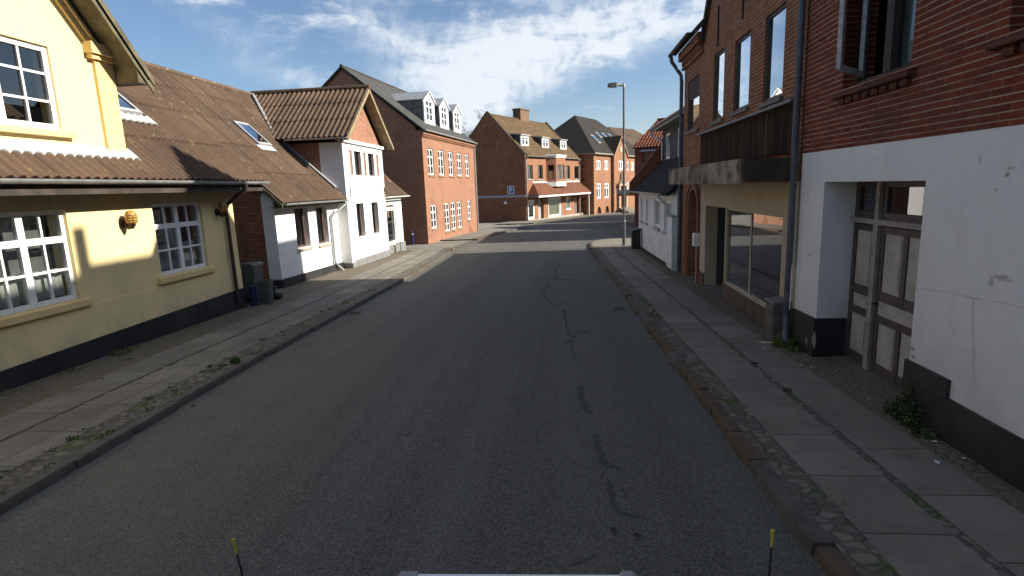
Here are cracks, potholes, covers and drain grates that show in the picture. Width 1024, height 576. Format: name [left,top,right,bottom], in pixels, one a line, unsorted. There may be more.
crack [543,263,589,357]
